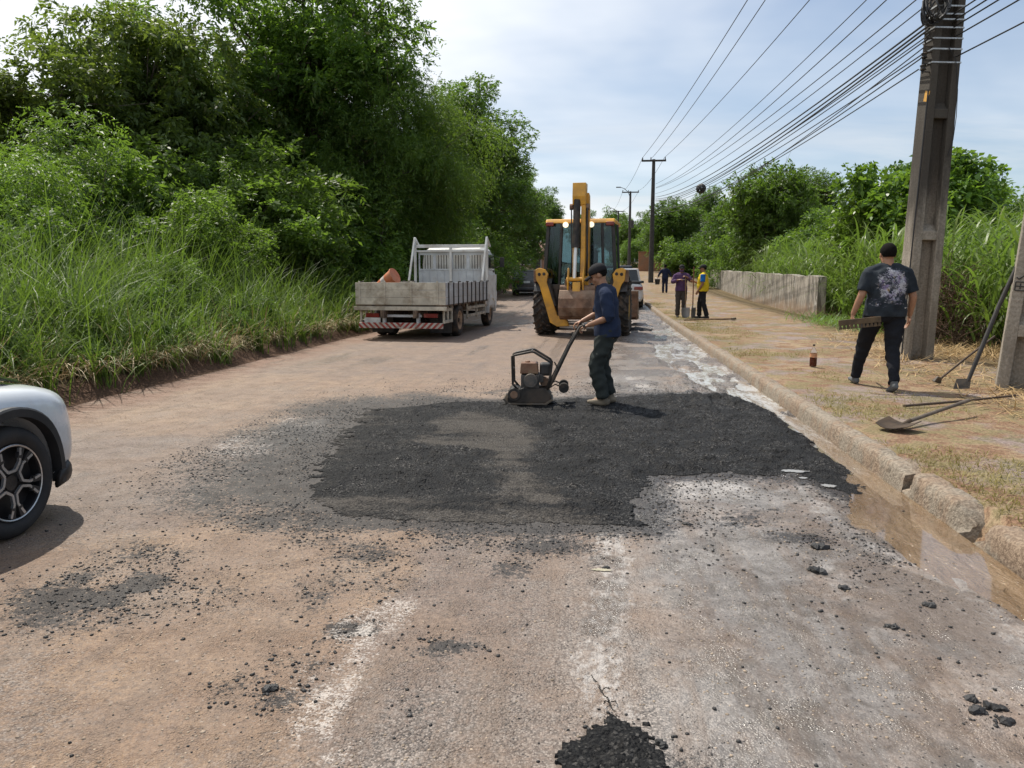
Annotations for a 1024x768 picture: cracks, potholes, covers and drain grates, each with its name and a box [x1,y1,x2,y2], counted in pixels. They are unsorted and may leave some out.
crack [592,676,620,718]
